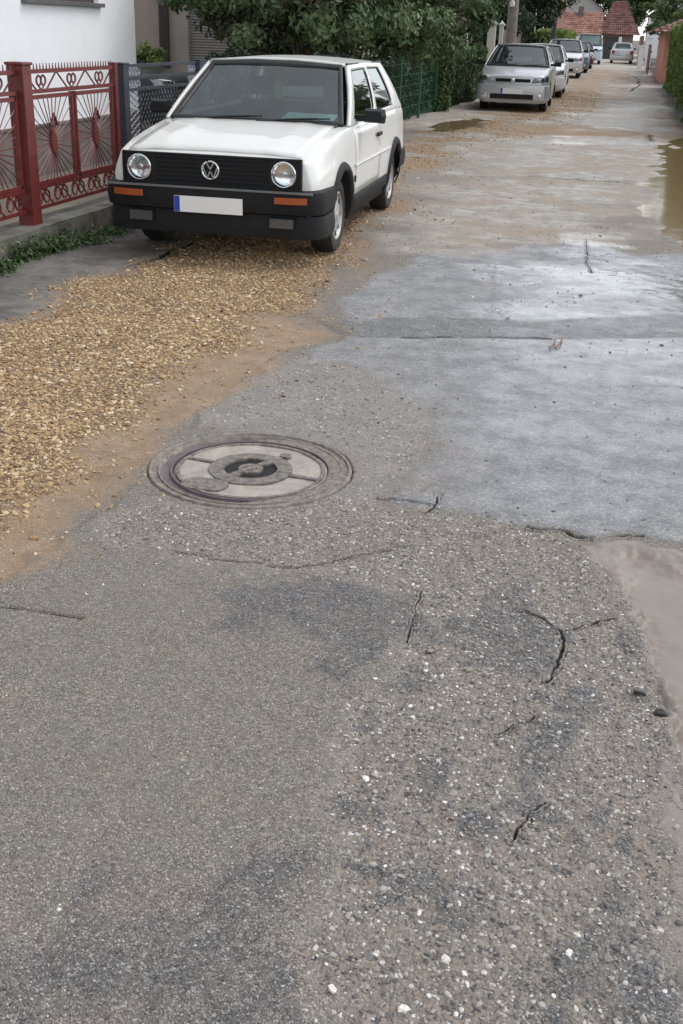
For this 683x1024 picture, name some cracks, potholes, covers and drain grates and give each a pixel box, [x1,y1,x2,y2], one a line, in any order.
crack [521,523,648,541]
crack [168,544,409,569]
manhole cover [148,433,352,510]
crack [494,714,538,738]
crack [583,239,594,273]
crack [506,801,550,846]
crack [1,604,88,619]
crack [404,590,424,644]
crack [372,495,441,515]
crack [518,609,618,685]
